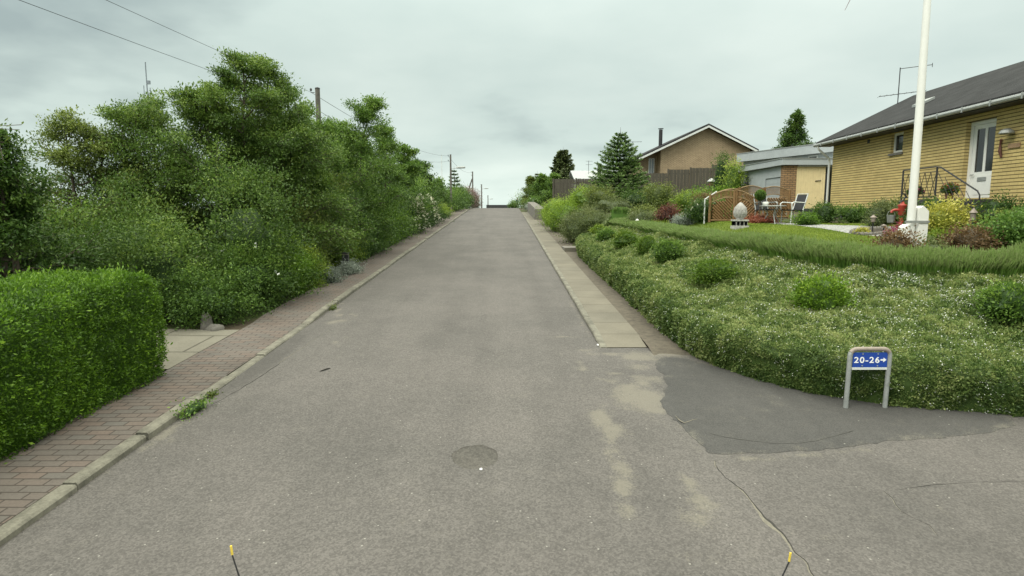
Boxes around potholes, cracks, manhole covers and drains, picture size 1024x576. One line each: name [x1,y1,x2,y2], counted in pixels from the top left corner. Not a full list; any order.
crack [885,481,1020,537]
crack [708,430,853,443]
crack [714,460,814,576]
